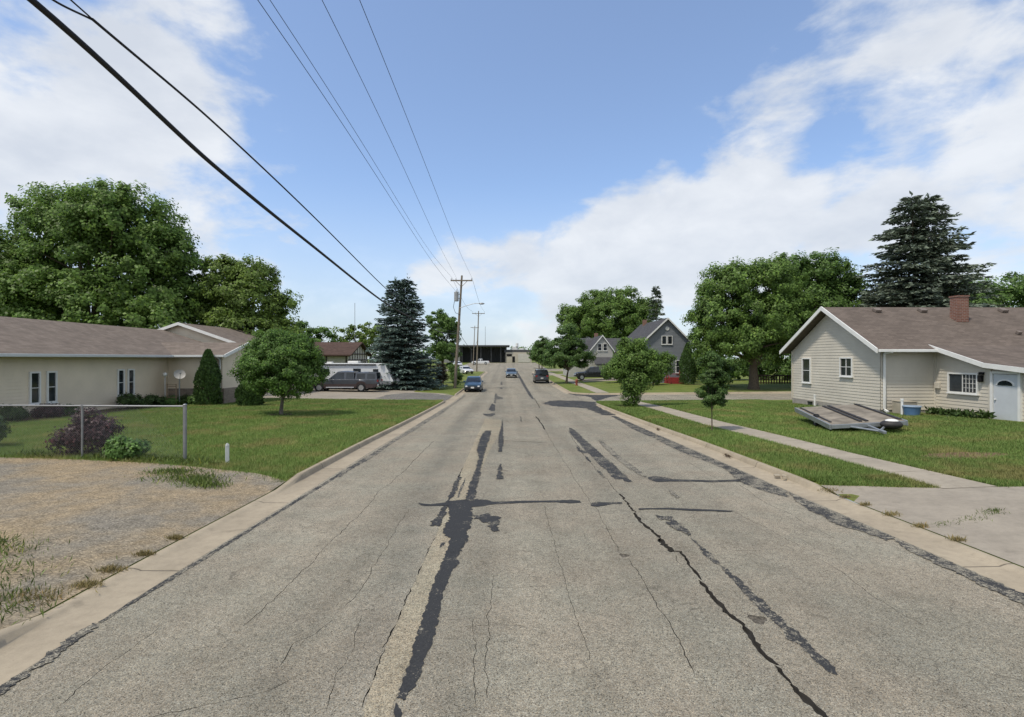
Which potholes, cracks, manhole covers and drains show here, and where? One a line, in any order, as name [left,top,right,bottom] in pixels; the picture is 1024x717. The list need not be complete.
crack [503,396,927,717]
crack [152,682,285,717]
crack [243,445,430,711]
